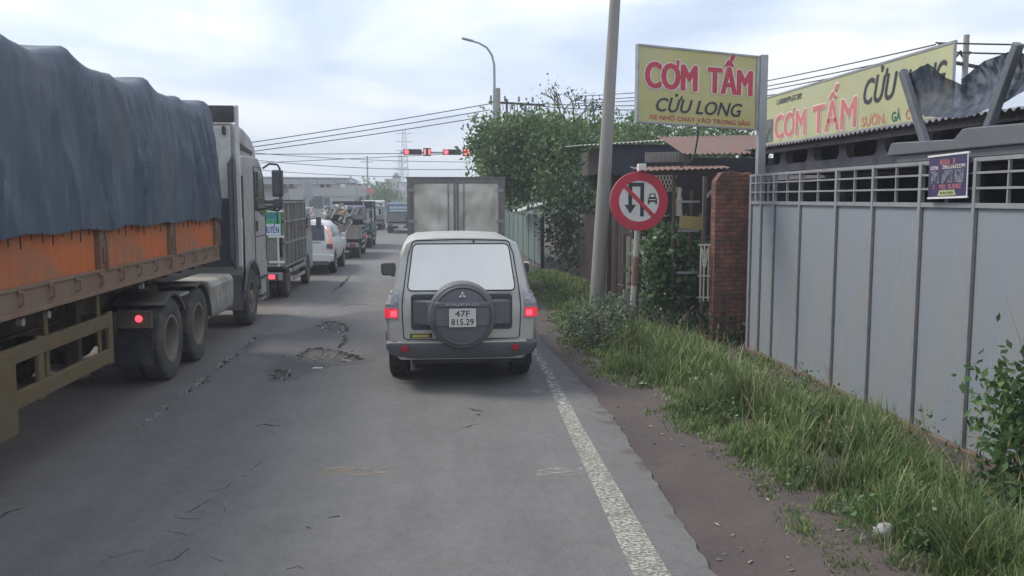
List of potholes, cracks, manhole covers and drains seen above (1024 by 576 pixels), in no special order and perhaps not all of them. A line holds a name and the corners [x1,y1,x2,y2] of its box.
pothole [316,319,354,333]
crack [338,334,349,349]
crack [109,461,262,567]
pothole [282,346,361,364]
pothole [268,368,294,380]
crack [331,277,369,307]
crack [137,337,258,429]
